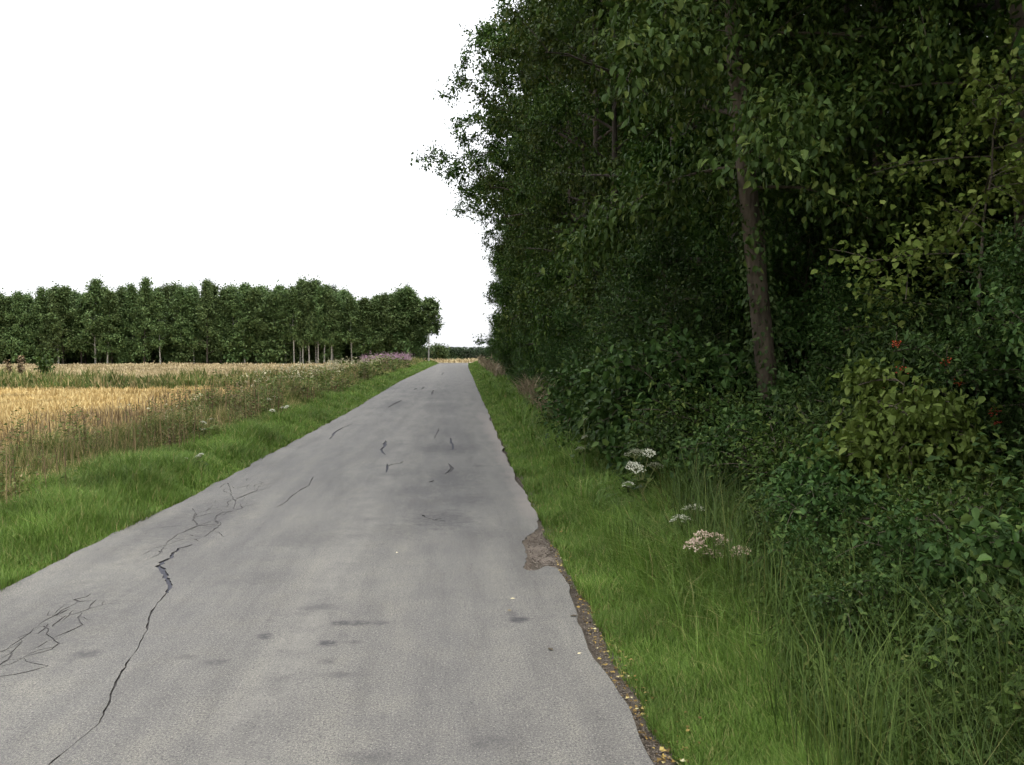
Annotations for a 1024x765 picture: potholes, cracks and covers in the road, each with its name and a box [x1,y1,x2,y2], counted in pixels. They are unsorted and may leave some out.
crack [431,430,454,482]
crack [1,596,103,676]
crack [49,479,264,765]
pothole [522,520,574,580]
